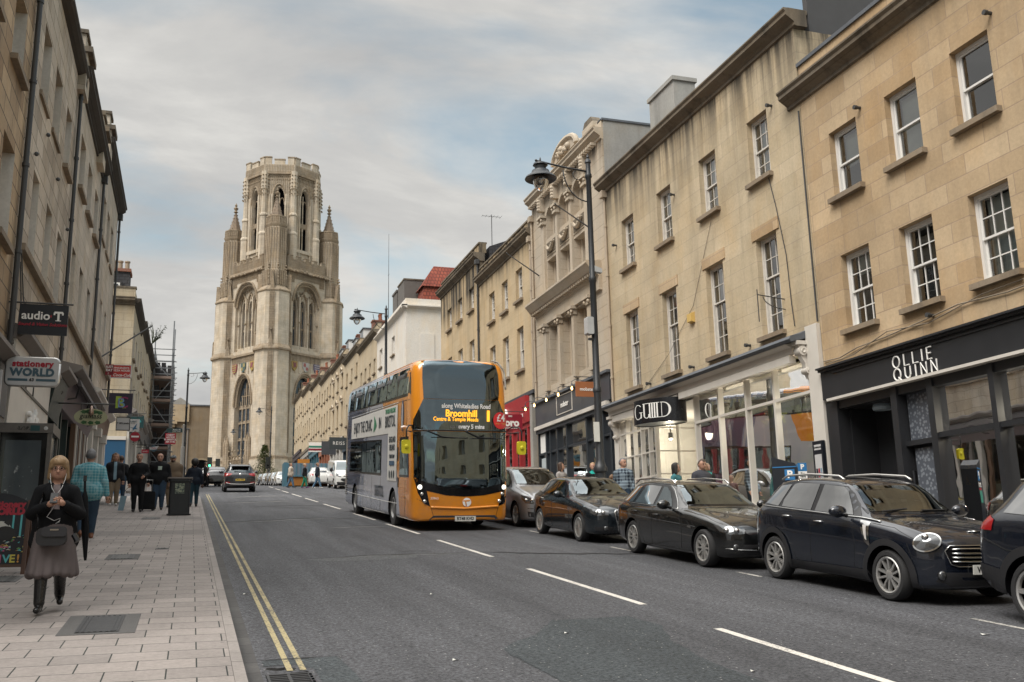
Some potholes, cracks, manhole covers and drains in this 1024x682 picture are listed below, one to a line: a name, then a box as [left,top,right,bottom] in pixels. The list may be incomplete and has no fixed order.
drain grate [266,672,317,682]
manhole cover [55,614,141,636]
